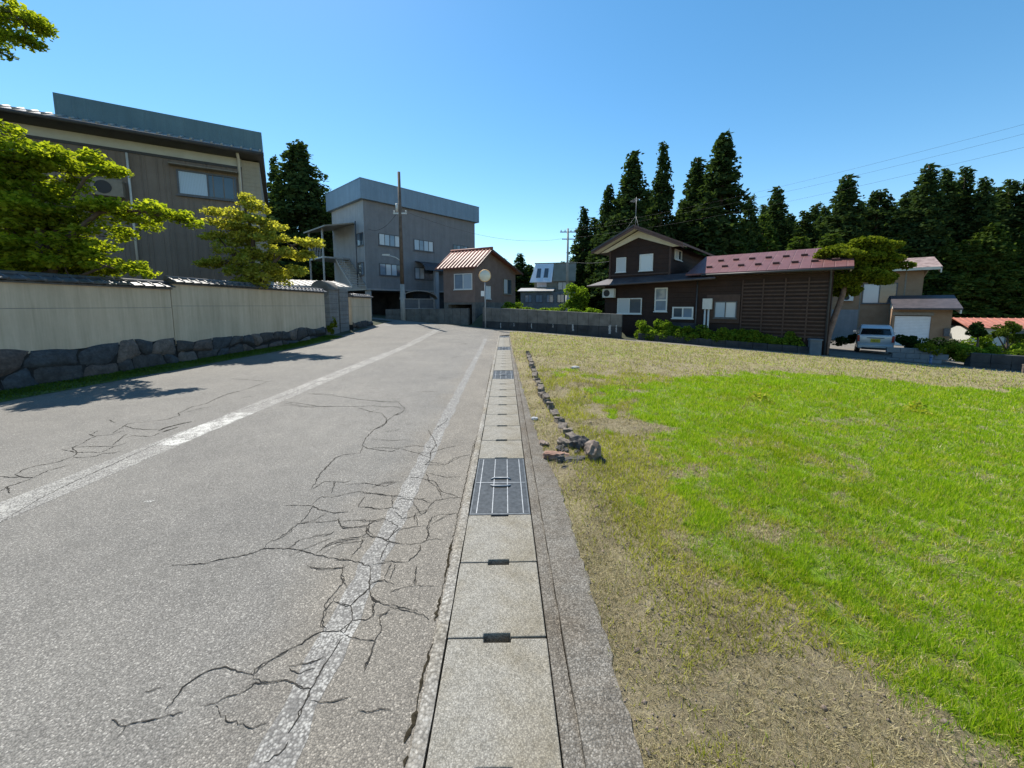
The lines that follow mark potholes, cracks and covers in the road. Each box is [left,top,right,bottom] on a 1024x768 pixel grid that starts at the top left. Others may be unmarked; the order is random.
drain grate [469,459,530,517]
crack [0,379,268,493]
drain grate [493,371,514,379]
crack [112,366,492,766]
